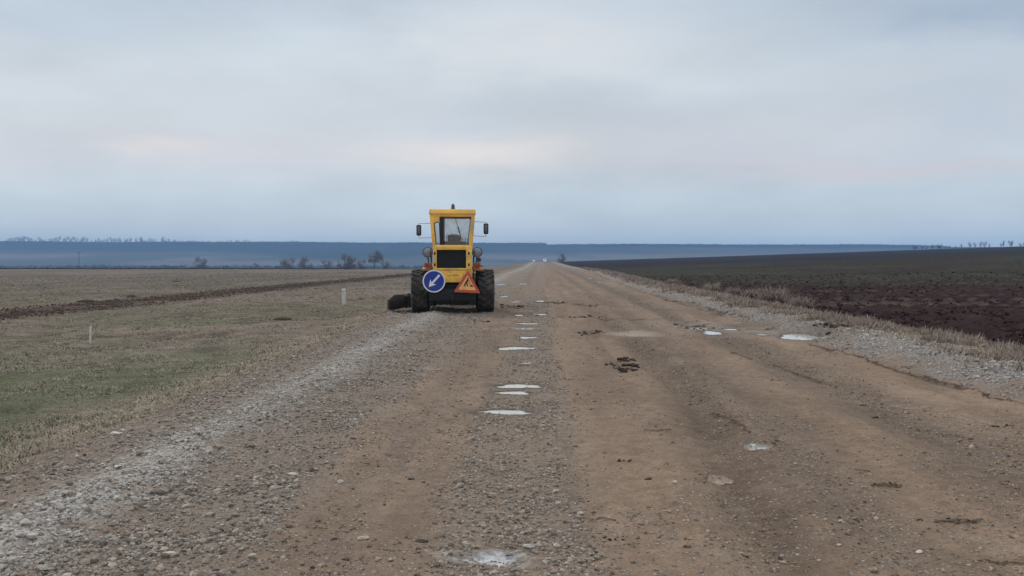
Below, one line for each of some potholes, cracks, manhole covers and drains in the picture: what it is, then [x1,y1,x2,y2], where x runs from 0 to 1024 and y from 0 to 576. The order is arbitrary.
pothole [601,330,666,338]
pothole [426,548,544,571]
pothole [707,475,735,486]
pothole [743,443,773,452]
pothole [461,408,545,416]
pothole [773,331,828,342]
